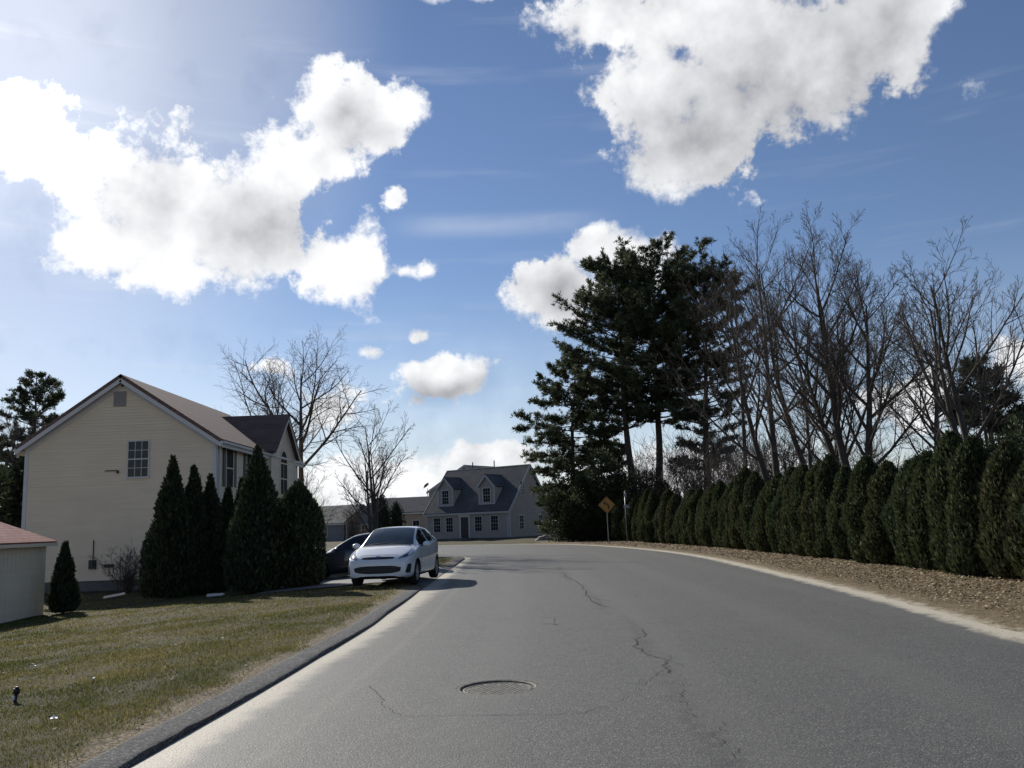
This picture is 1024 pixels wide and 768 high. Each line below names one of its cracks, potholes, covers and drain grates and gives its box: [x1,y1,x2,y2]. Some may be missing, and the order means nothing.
crack [343,629,744,759]
manhole cover [457,680,540,696]
